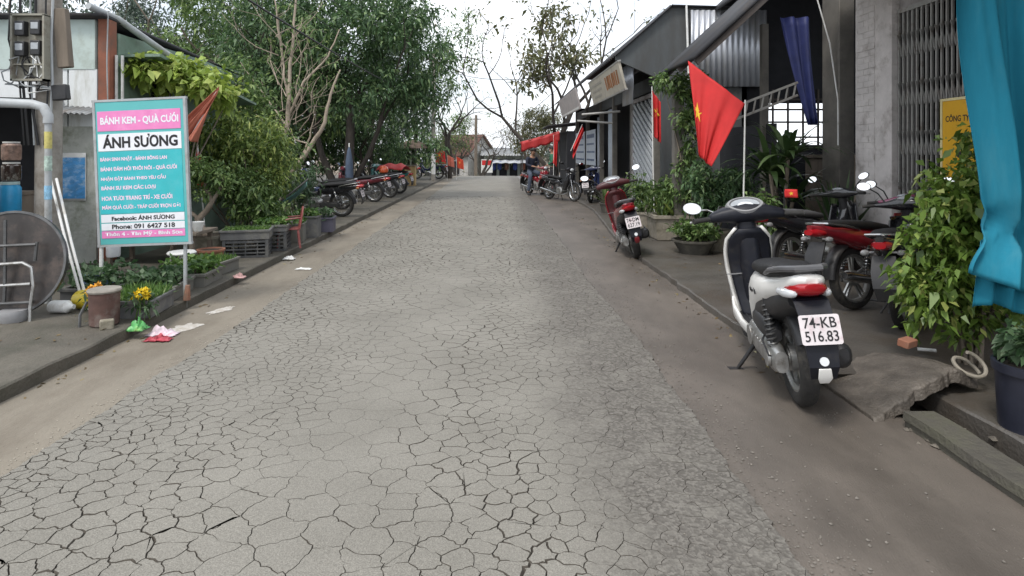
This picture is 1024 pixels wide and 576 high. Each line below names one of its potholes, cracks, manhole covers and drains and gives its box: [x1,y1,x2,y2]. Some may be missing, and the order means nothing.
crack [0,196,807,576]
